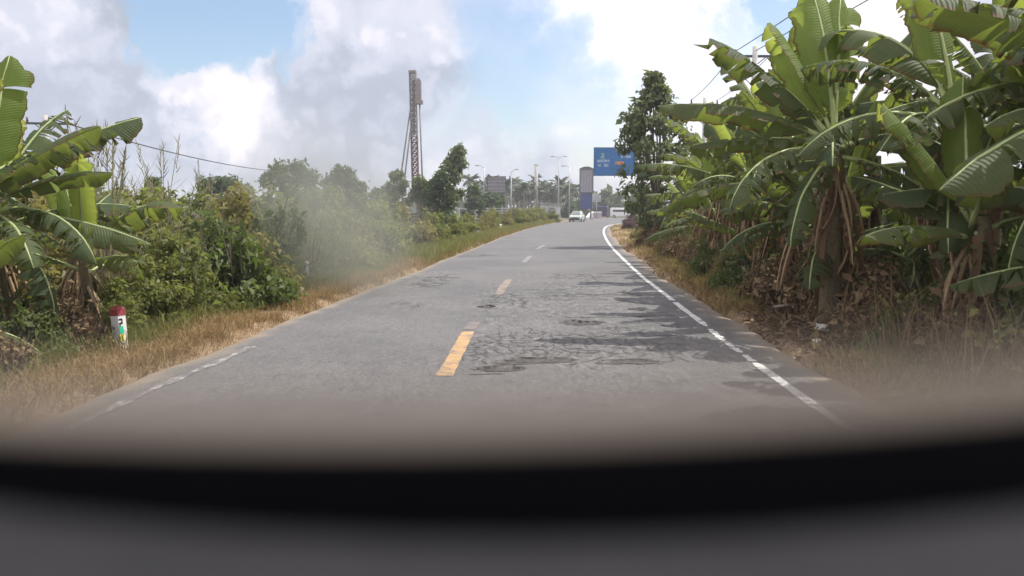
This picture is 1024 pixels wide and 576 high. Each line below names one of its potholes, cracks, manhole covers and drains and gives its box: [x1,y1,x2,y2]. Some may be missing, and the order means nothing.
pothole [491,356,580,365]
crack [462,273,688,375]
crack [399,274,452,288]
pothole [470,364,526,372]
